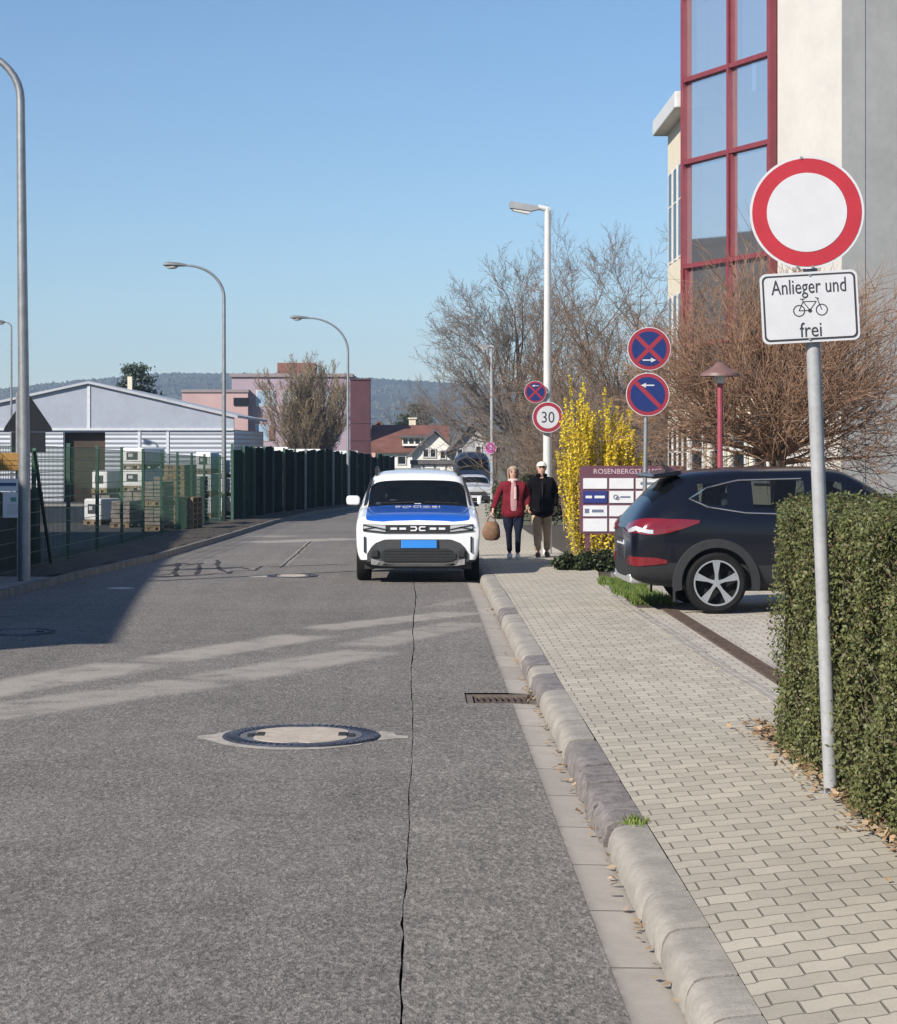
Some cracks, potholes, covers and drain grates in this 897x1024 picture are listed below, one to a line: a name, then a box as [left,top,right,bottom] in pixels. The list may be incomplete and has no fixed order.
drain grate [465,694,537,705]
manhole cover [0,628,57,636]
manhole cover [197,724,408,750]
crack [399,569,417,1024]
